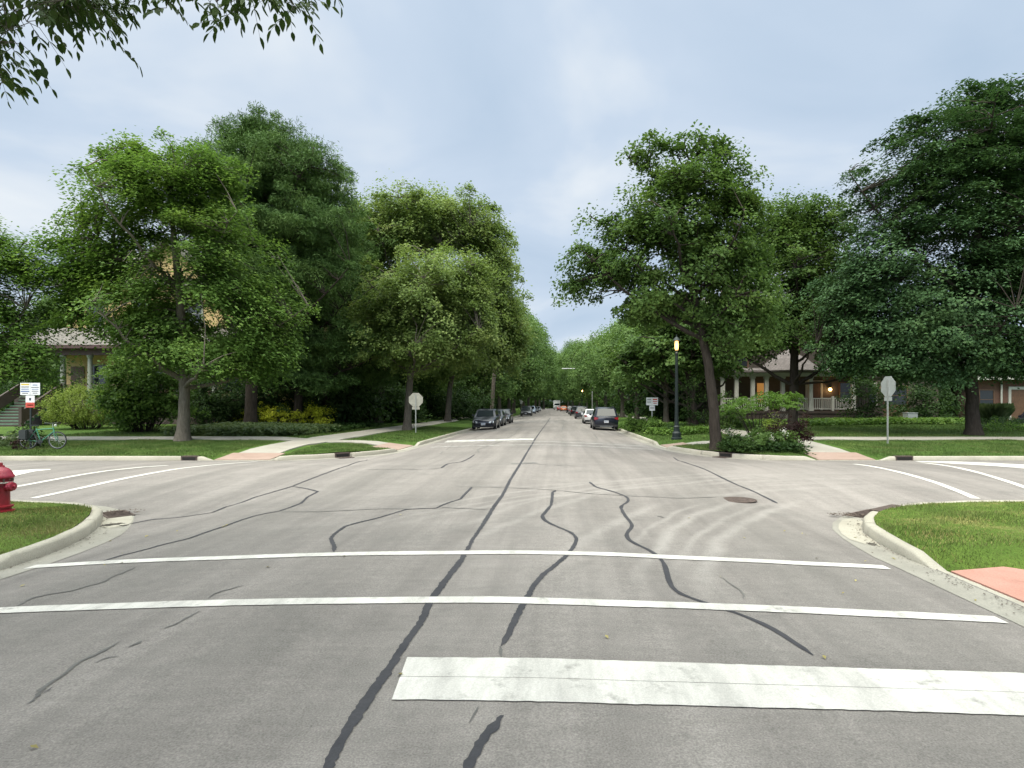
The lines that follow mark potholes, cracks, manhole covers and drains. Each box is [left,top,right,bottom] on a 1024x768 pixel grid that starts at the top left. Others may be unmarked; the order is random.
drain grate [103,510,135,518]
crack [28,585,243,703]
drain grate [844,504,901,518]
